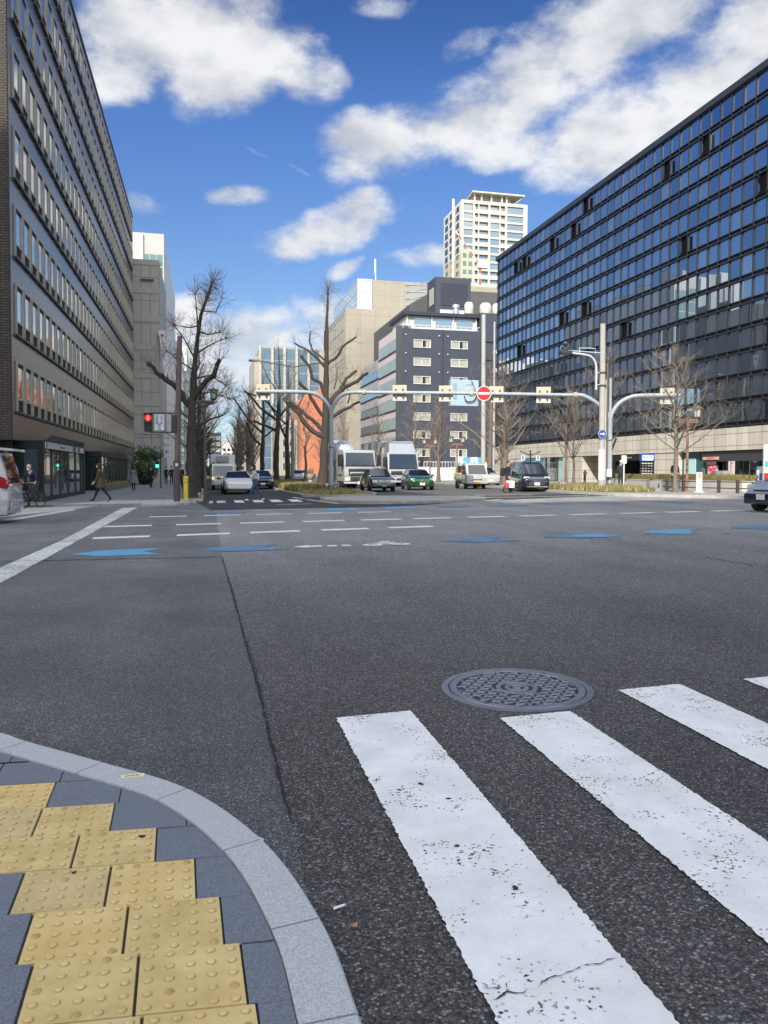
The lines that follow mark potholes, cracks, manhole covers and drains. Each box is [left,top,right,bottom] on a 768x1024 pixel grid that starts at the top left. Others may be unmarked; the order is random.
manhole cover [442,668,594,712]
crack [483,958,614,1000]
